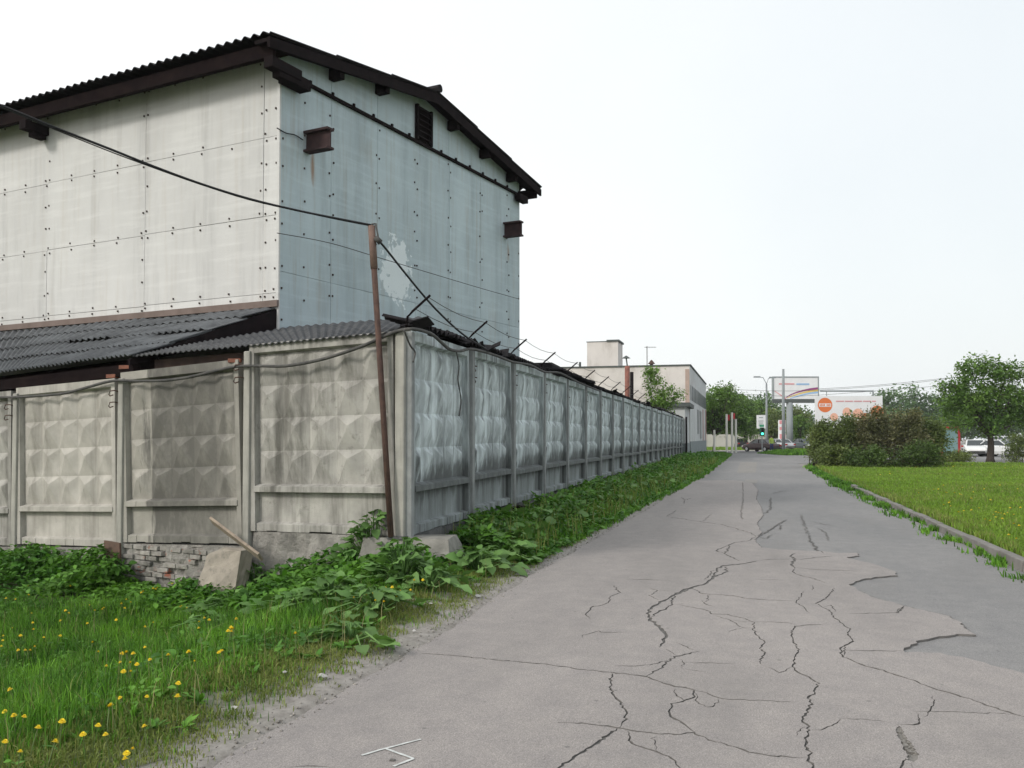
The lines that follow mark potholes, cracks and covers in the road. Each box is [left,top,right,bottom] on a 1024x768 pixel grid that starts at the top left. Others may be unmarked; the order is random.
crack [786,627,818,768]
crack [790,515,999,713]
crack [560,675,677,768]
crack [647,490,788,725]
